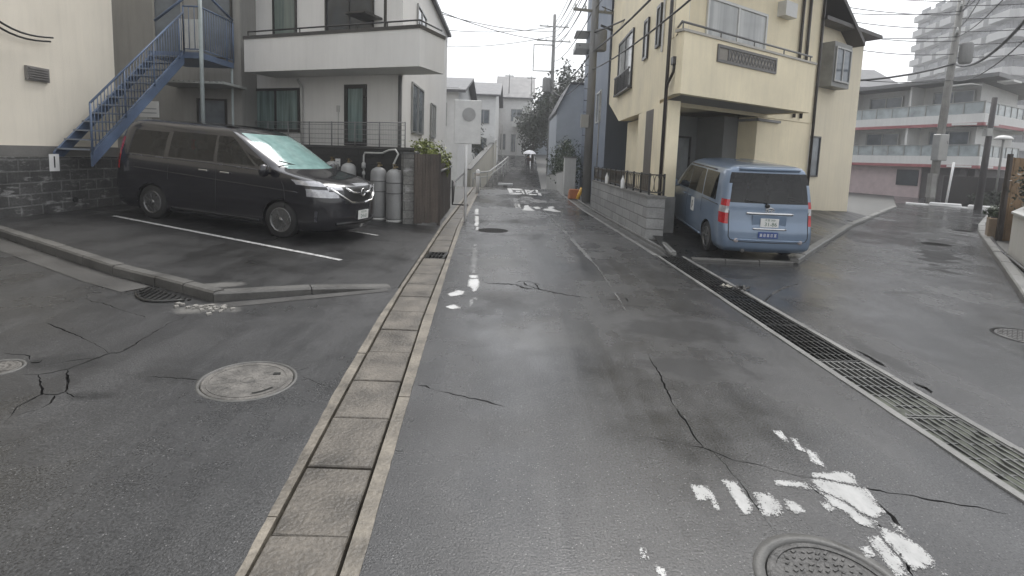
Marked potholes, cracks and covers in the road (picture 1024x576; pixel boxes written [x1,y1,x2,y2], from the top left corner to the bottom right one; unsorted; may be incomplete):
drain grate [698,280,755,300]
manhole cover [752,533,895,576]
crack [488,281,587,298]
manhole cover [0,359,42,375]
crack [418,385,505,407]
drain grate [764,324,861,362]
drain grate [906,416,1024,494]
drain grate [726,299,798,326]
drain grate [820,360,958,419]
manhole cover [989,327,1024,343]
crack [628,359,1004,576]
drain grate [662,257,697,267]
